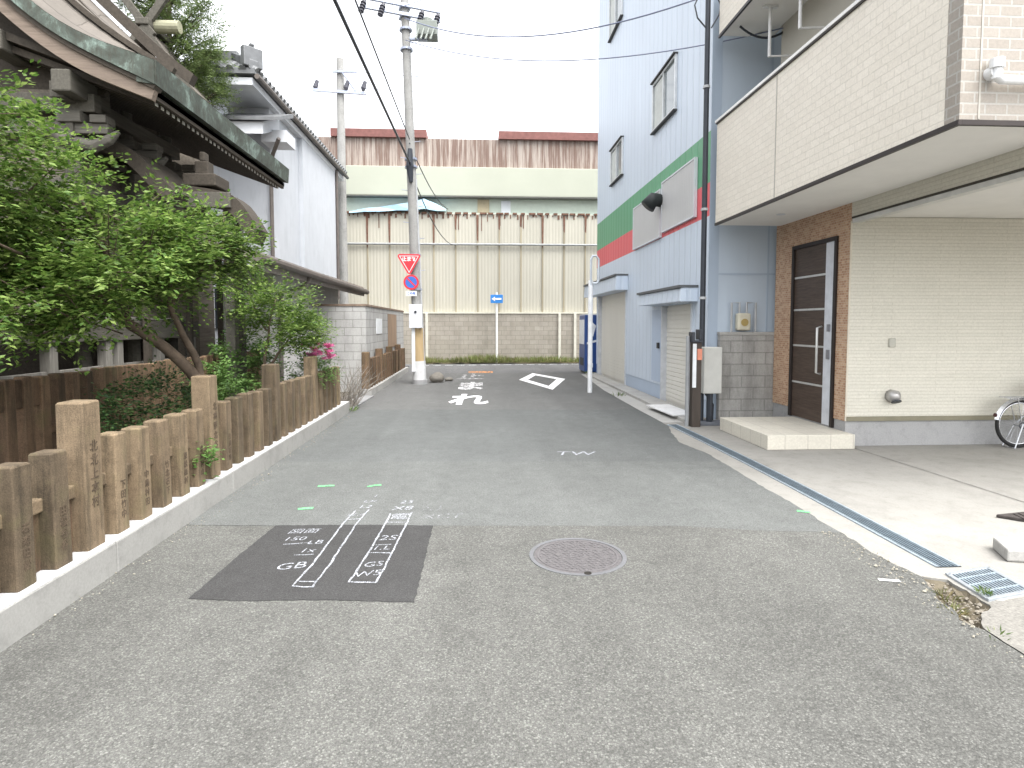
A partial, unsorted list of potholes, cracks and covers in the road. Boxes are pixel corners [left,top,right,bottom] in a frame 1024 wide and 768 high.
drain grate [945,566,1024,602]
manhole cover [529,538,627,576]
